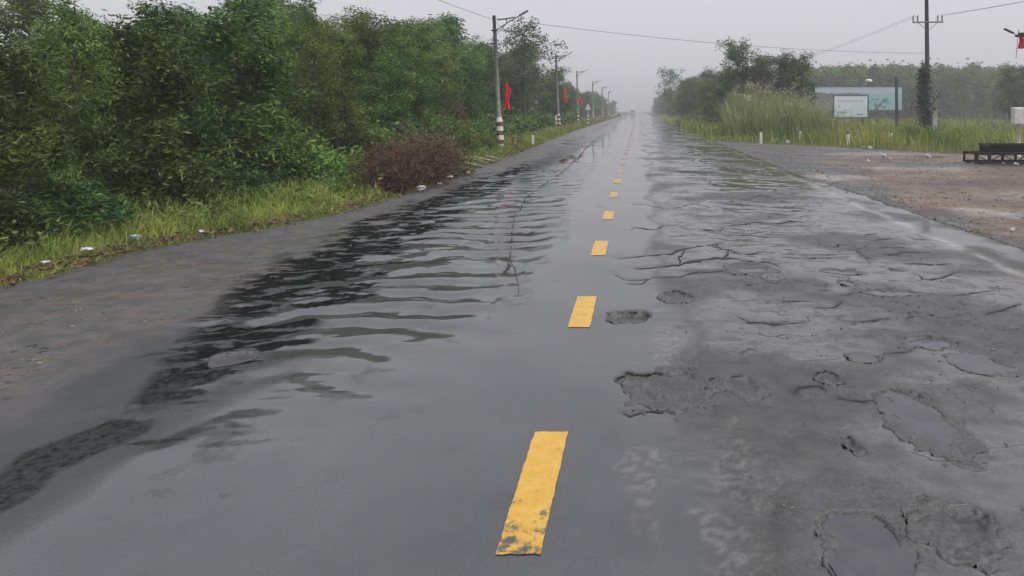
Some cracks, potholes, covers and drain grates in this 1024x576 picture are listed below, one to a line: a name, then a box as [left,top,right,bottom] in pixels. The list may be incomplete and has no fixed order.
crack [742,301,886,325]
pothole [606,310,653,324]
pothole [901,493,1010,575]
pothole [870,387,990,472]
pothole [843,352,883,364]
crack [503,136,600,294]
pothole [615,364,725,420]
crack [618,179,1021,314]
pothole [657,290,693,304]
pothole [813,370,843,388]
pothole [941,351,1024,377]
pothole [814,510,921,576]
